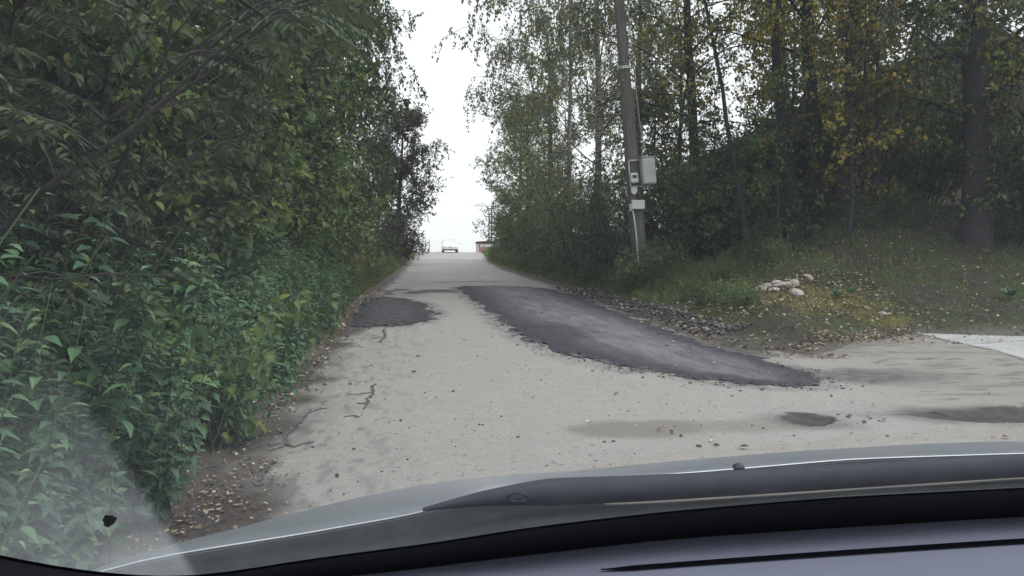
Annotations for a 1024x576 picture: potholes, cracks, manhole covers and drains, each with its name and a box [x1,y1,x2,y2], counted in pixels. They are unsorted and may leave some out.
crack [247,407,326,486]
crack [344,383,377,417]
pothole [773,412,840,428]
pothole [893,404,1024,424]
